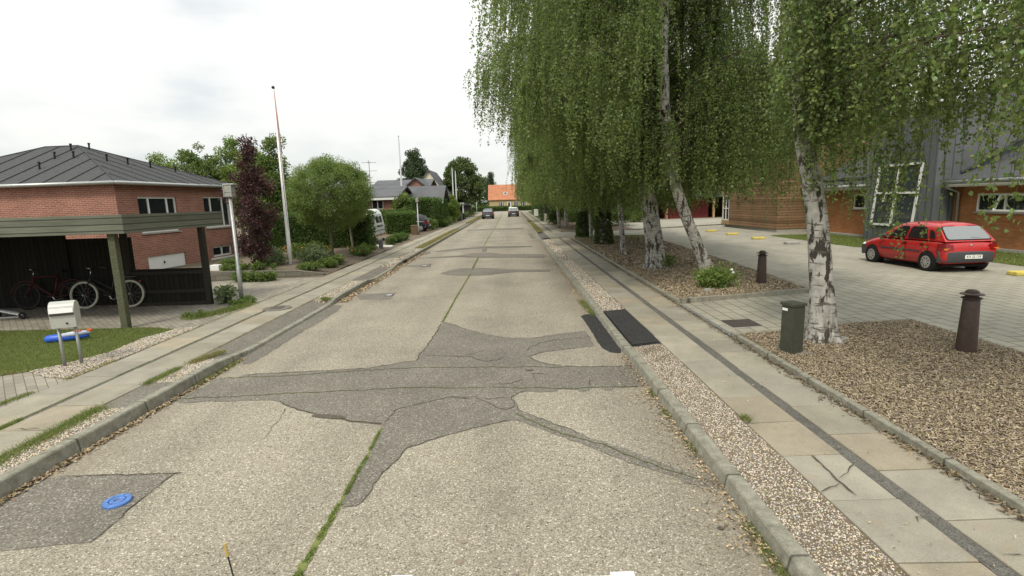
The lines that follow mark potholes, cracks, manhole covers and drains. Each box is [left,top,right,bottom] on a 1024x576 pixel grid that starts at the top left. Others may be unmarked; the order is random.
manhole cover [718,319,764,329]
crack [812,455,855,494]
manhole cover [101,493,133,510]
crack [187,322,703,507]
